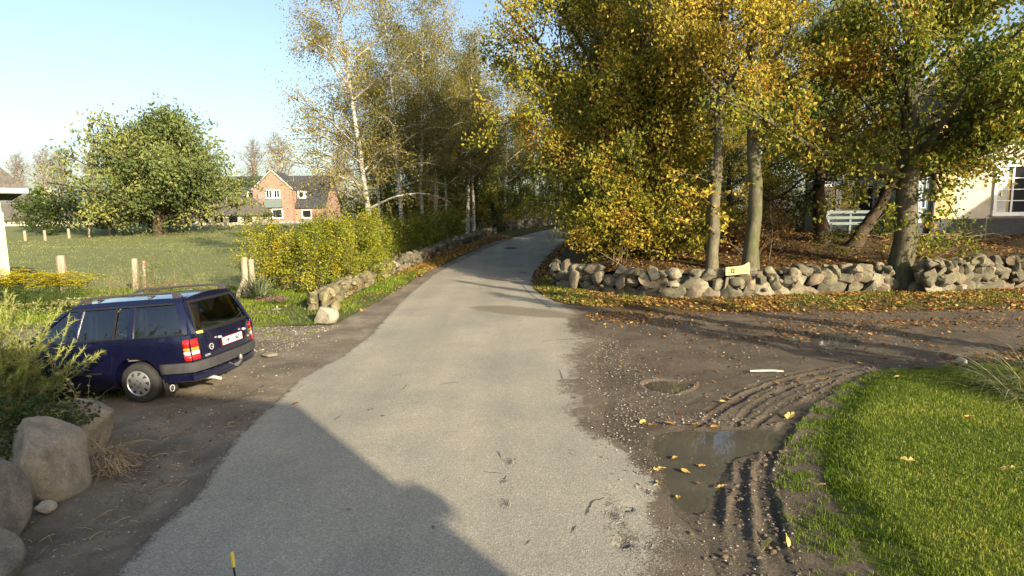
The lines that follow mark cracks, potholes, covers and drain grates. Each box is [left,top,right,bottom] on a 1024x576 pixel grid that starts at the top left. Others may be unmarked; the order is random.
pothole [634,378,707,397]
